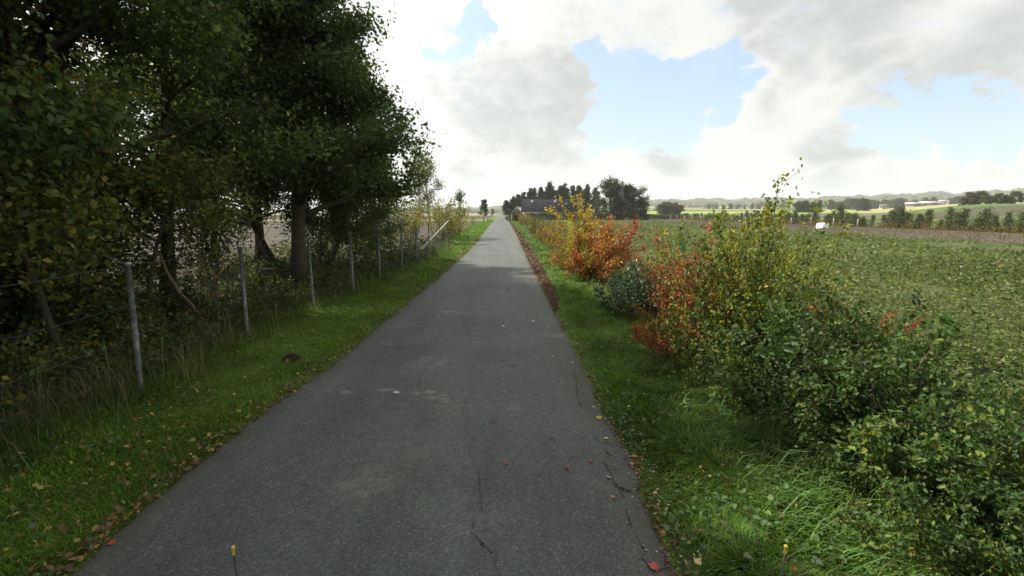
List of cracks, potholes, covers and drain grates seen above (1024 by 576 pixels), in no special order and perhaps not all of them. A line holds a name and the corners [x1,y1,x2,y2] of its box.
crack [594,437,670,573]
crack [470,469,497,569]
